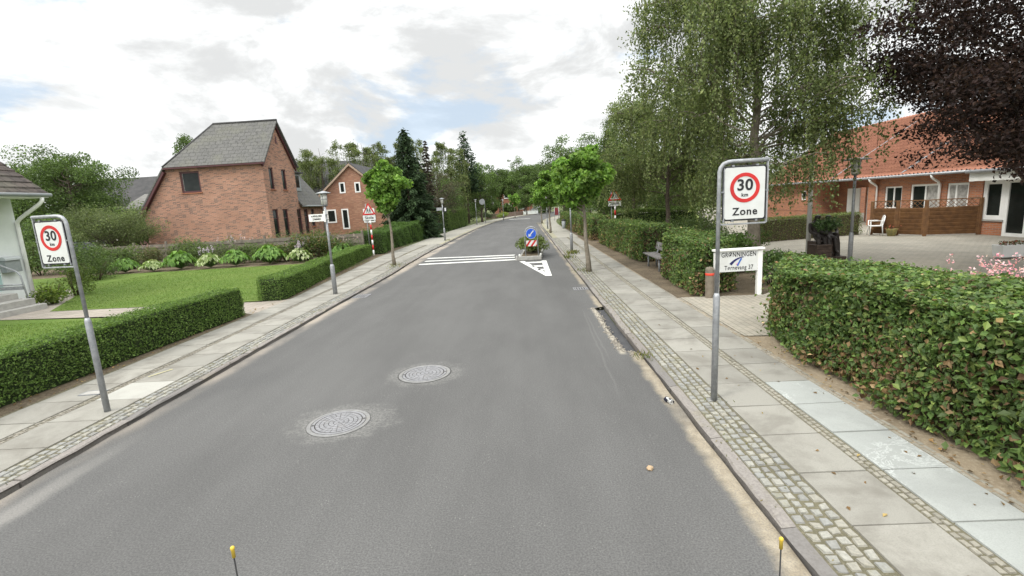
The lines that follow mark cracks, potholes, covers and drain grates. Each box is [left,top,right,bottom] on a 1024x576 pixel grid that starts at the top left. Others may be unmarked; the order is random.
manhole cover [306,409,371,437]
manhole cover [398,364,451,383]
